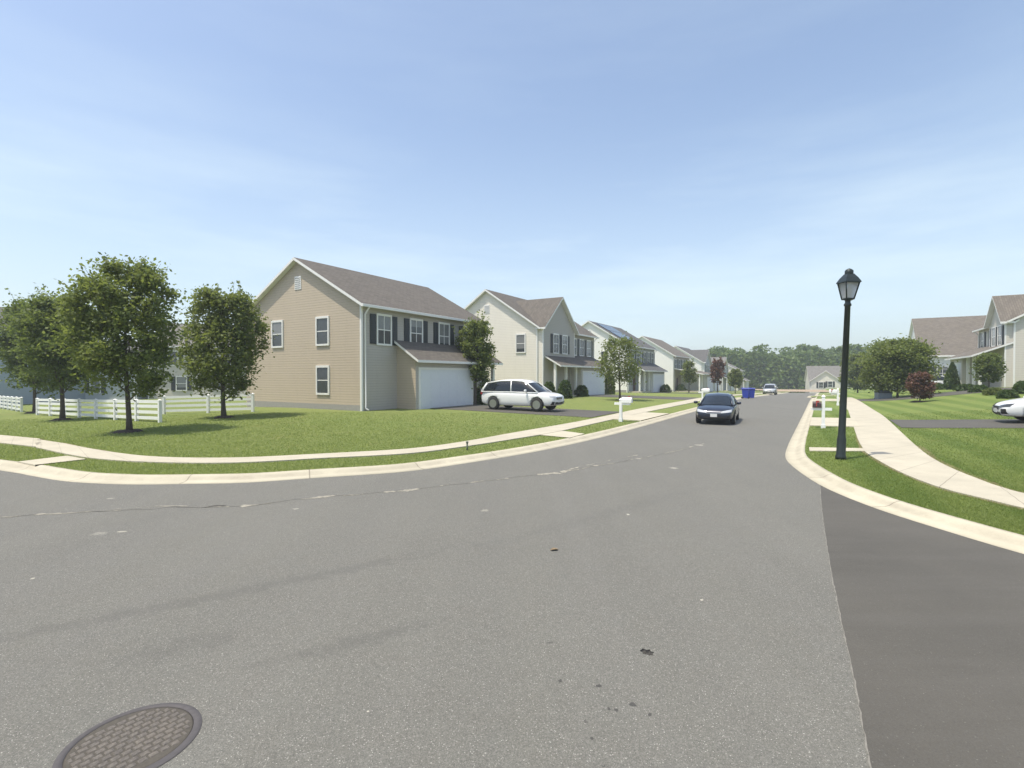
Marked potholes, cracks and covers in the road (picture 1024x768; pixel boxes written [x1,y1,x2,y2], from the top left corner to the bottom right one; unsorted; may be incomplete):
manhole cover [52,703,202,768]
crack [9,443,704,517]
